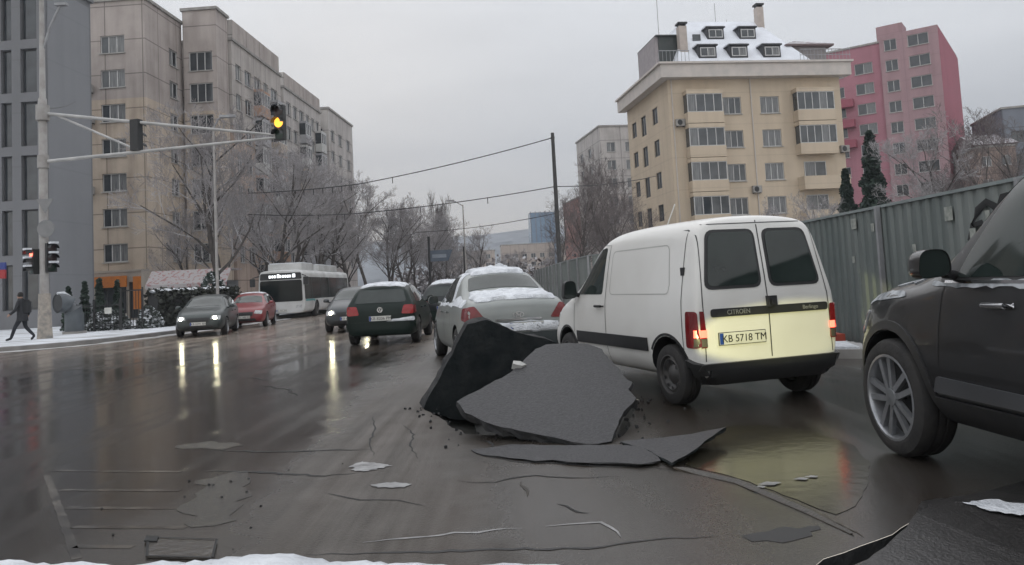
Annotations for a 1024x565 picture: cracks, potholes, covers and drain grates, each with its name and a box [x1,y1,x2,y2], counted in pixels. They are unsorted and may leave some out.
manhole cover [144,535,218,560]
crack [328,493,420,505]
crack [221,418,376,453]
pothole [424,399,639,441]
crack [459,440,662,496]
crack [307,504,718,555]
